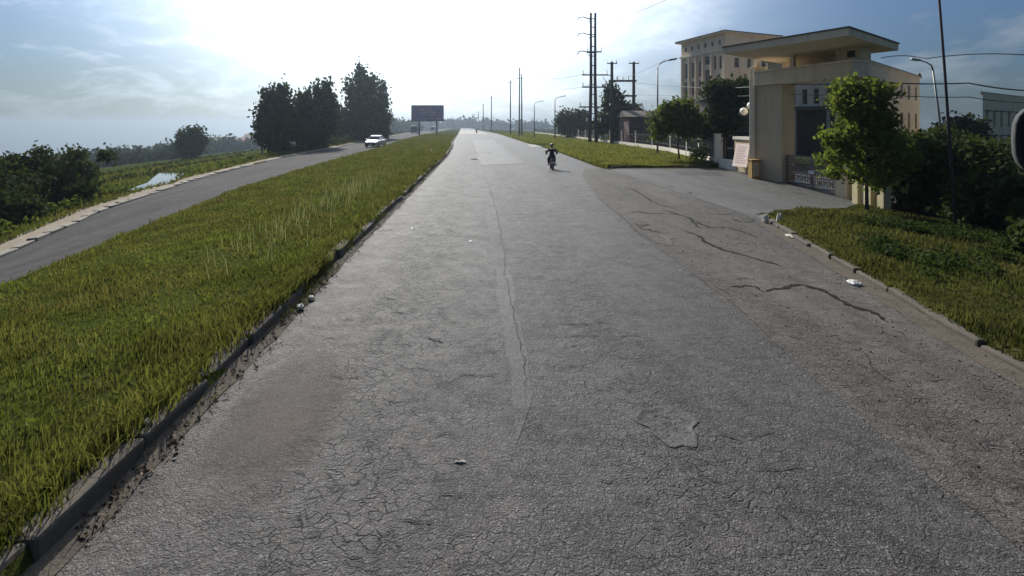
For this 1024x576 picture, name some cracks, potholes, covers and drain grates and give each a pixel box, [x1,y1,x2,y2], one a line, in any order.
crack [602,201,950,381]
